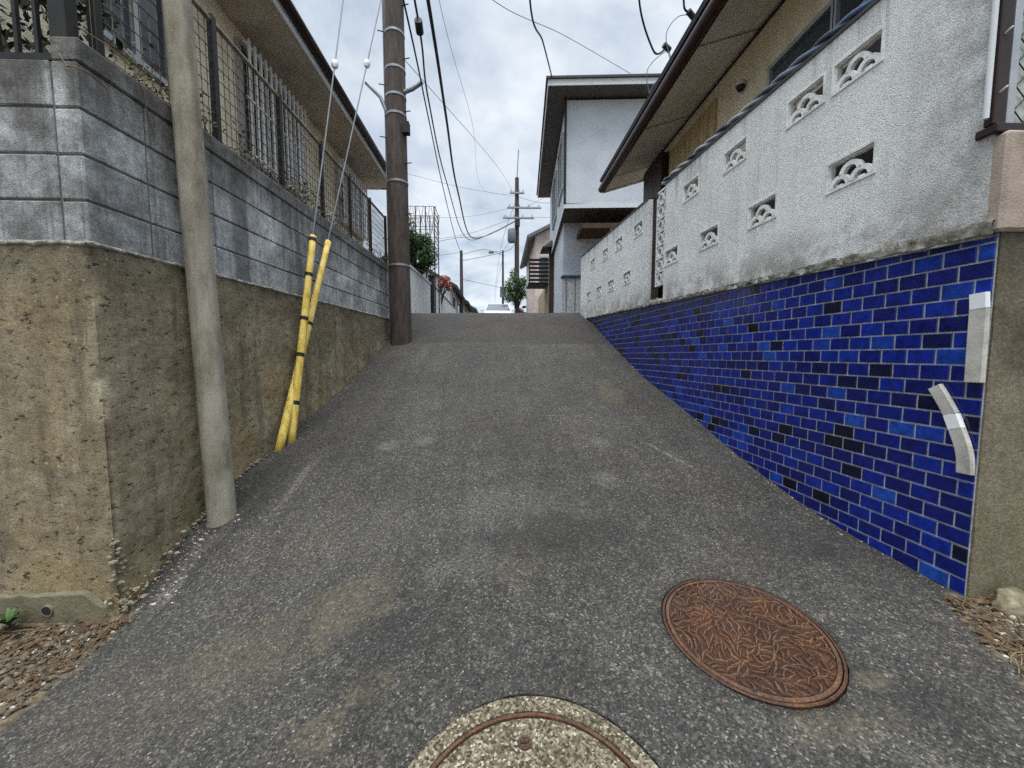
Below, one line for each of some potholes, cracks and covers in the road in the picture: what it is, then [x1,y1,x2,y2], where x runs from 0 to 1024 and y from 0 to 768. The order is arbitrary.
manhole cover [662,579,848,711]
manhole cover [408,696,659,768]
